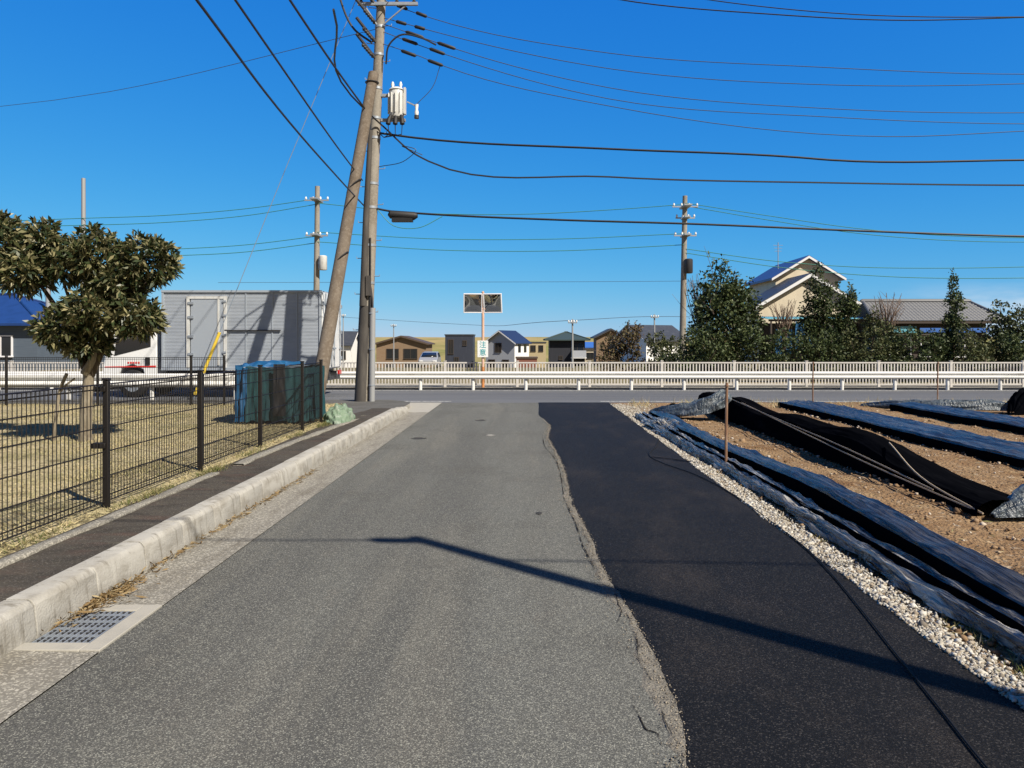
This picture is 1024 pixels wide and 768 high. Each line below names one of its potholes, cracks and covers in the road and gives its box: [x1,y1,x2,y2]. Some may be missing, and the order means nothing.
crack [634,706,674,745]
drain grate [13,605,162,707]
crack [542,437,595,569]
